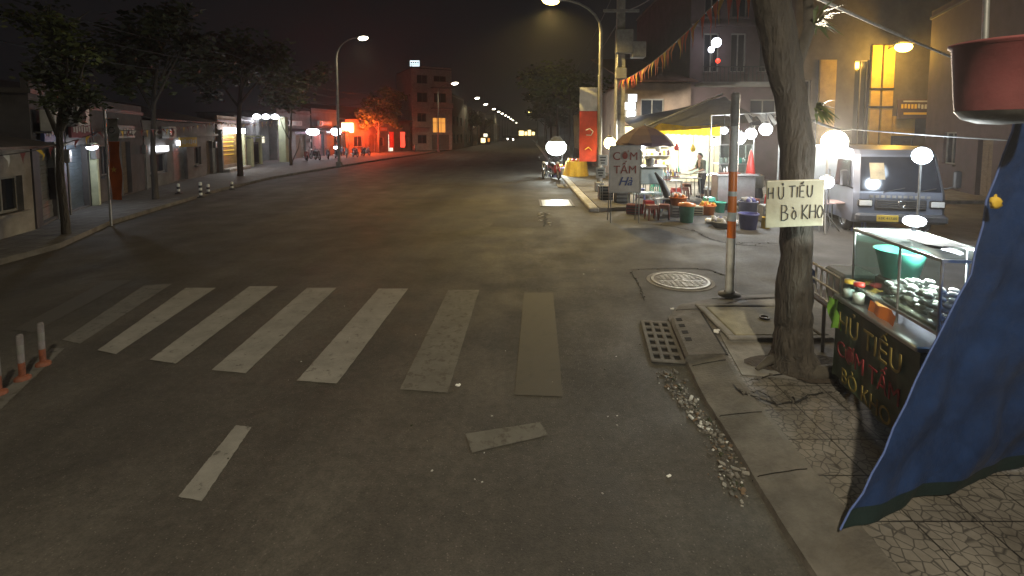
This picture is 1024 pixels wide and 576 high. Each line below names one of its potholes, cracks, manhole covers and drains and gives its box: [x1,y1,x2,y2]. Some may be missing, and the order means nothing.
crack [733,373,832,405]
manhole cover [646,271,715,292]
drain grate [640,320,686,365]
